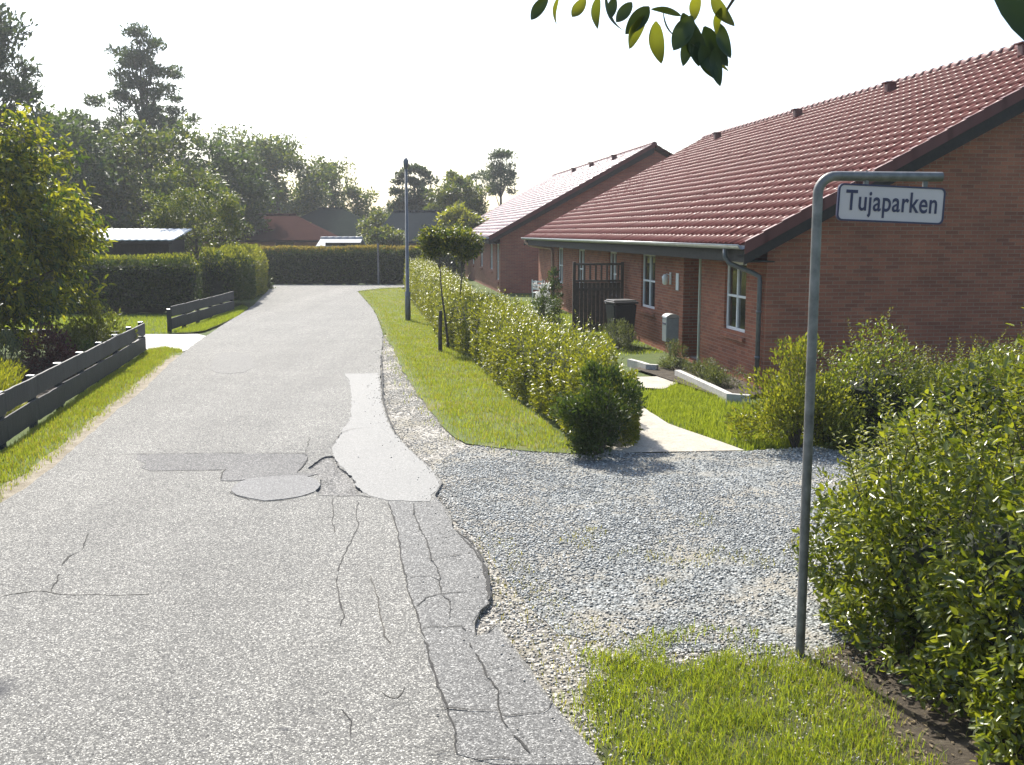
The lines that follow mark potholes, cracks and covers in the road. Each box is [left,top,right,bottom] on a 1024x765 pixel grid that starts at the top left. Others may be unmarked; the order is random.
crack [0,534,143,597]
crack [220,469,553,760]
